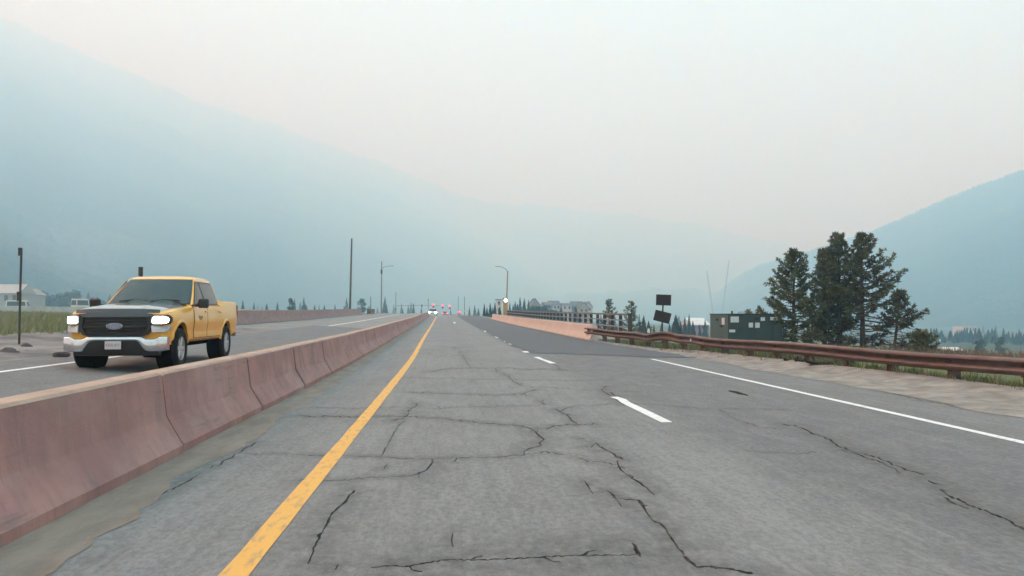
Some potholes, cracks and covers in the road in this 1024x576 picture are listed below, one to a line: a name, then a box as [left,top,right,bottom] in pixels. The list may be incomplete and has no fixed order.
crack [755,424,1024,530]
crack [163,345,783,574]
